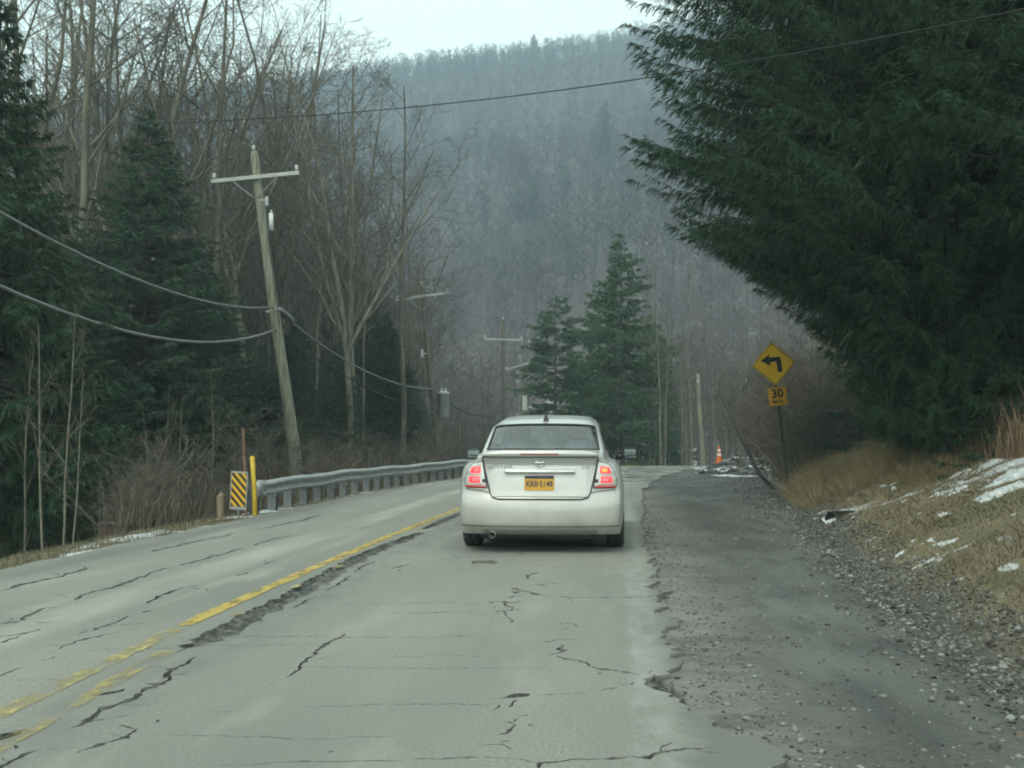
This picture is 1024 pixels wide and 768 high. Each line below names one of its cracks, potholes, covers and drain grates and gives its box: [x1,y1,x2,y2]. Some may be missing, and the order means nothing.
crack [0,535,721,768]
pothole [177,532,425,652]
